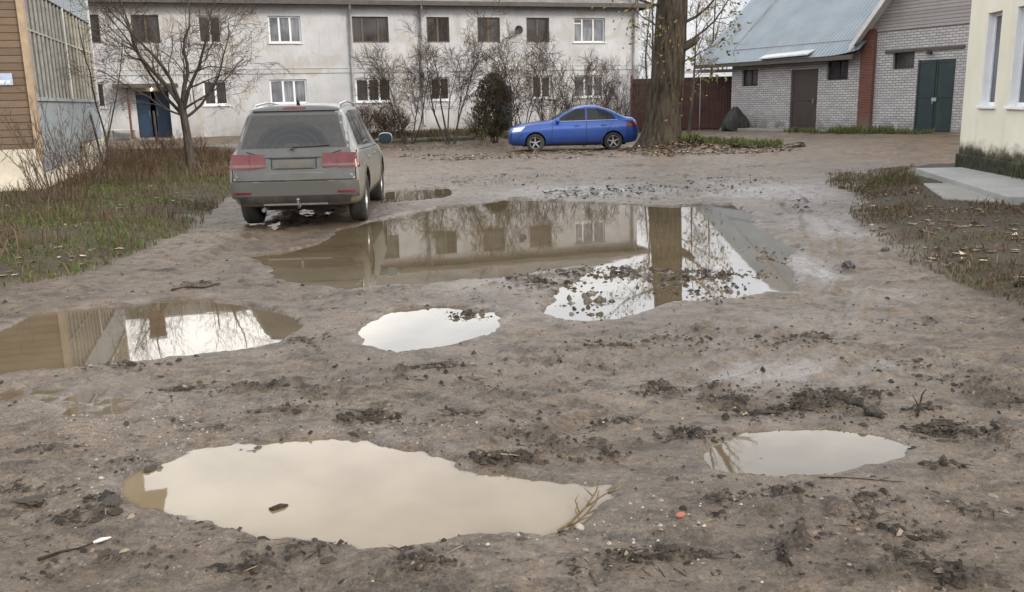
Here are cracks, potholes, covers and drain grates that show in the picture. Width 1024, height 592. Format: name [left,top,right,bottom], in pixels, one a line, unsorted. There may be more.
pothole [349,302,512,353]
pothole [240,197,808,321]
pothole [0,294,311,374]
pothole [372,185,456,203]
pothole [689,419,931,477]
pothole [100,428,632,556]
